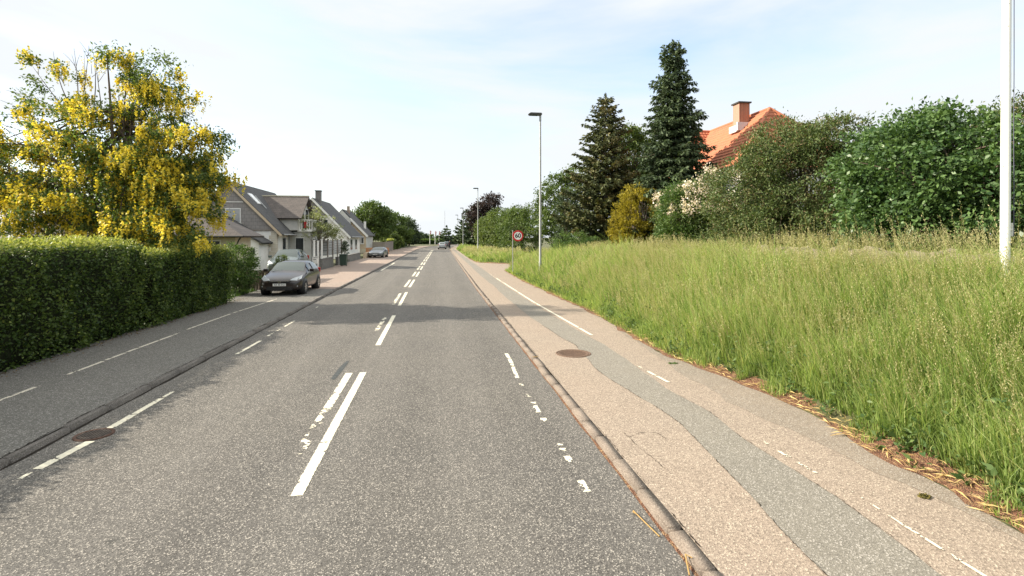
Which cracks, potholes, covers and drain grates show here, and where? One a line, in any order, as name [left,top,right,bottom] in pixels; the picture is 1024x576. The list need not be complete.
manhole cover [556,349,591,358]
